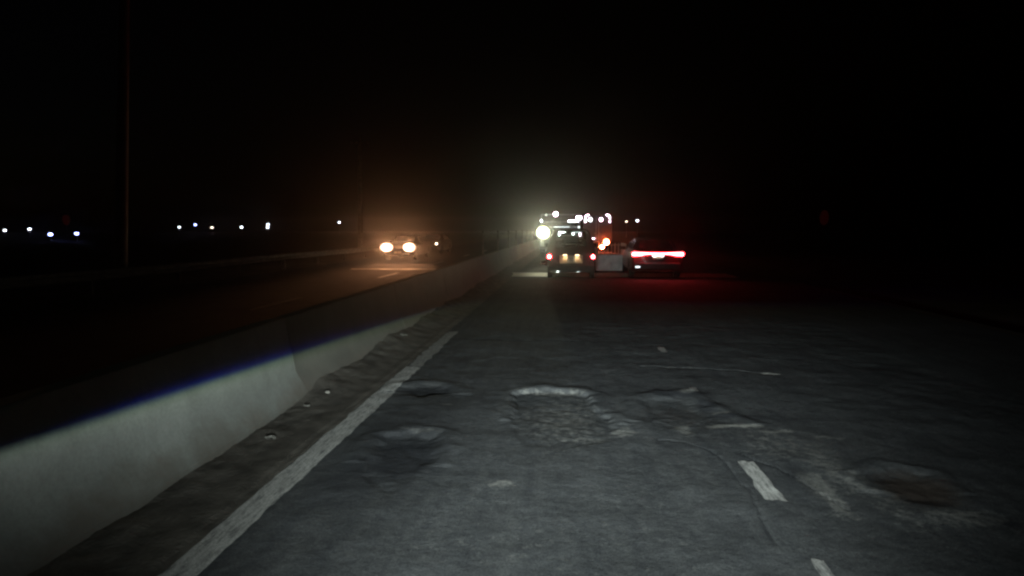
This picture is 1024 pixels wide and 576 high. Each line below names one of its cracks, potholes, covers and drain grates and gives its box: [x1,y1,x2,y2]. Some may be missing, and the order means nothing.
pothole [355,428,447,500]
pothole [395,382,457,398]
pothole [508,386,626,451]
pothole [857,463,969,509]
crack [658,439,851,547]
pothole [630,392,757,440]
